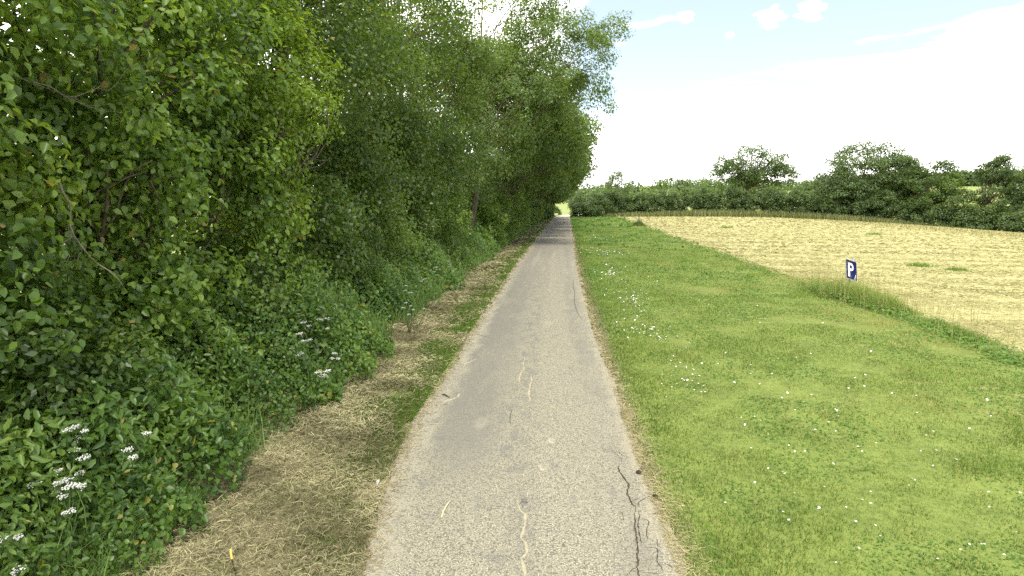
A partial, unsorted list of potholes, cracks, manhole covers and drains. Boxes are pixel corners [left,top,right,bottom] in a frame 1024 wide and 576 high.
crack [602,448,673,576]
crack [509,358,534,424]
crack [495,464,529,576]
